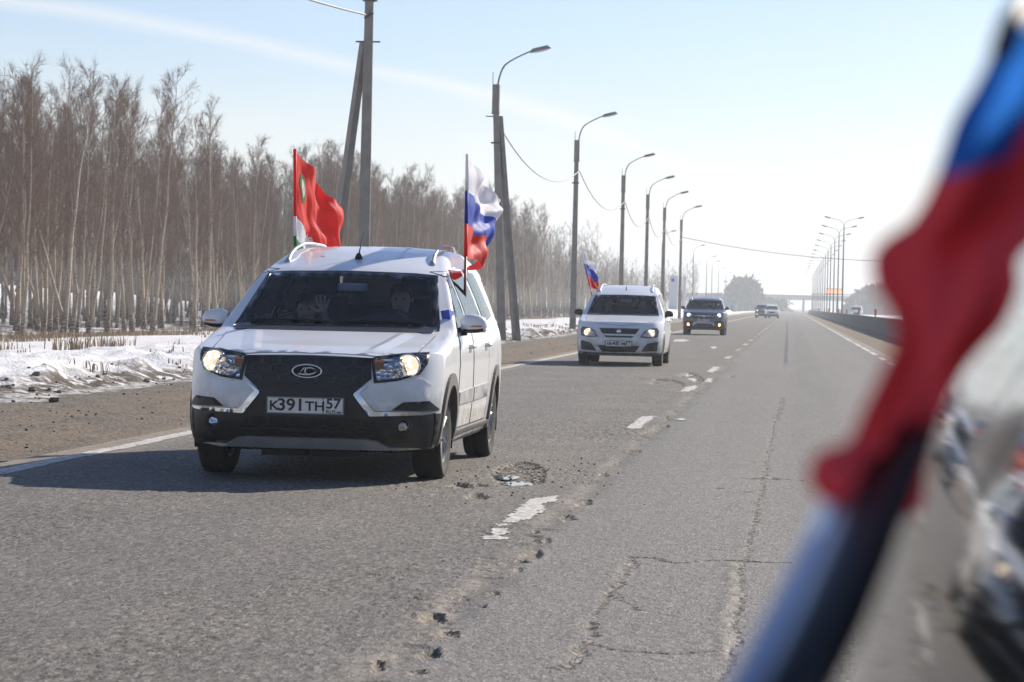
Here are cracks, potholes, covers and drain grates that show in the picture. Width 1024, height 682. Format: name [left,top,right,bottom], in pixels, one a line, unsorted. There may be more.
pothole [430,630,460,639]
pothole [417,612,448,626]
pothole [369,660,387,673]
pothole [676,372,705,383]
pothole [516,550,544,559]
pothole [488,461,547,487]
pothole [411,647,444,661]
crack [544,397,849,681]
